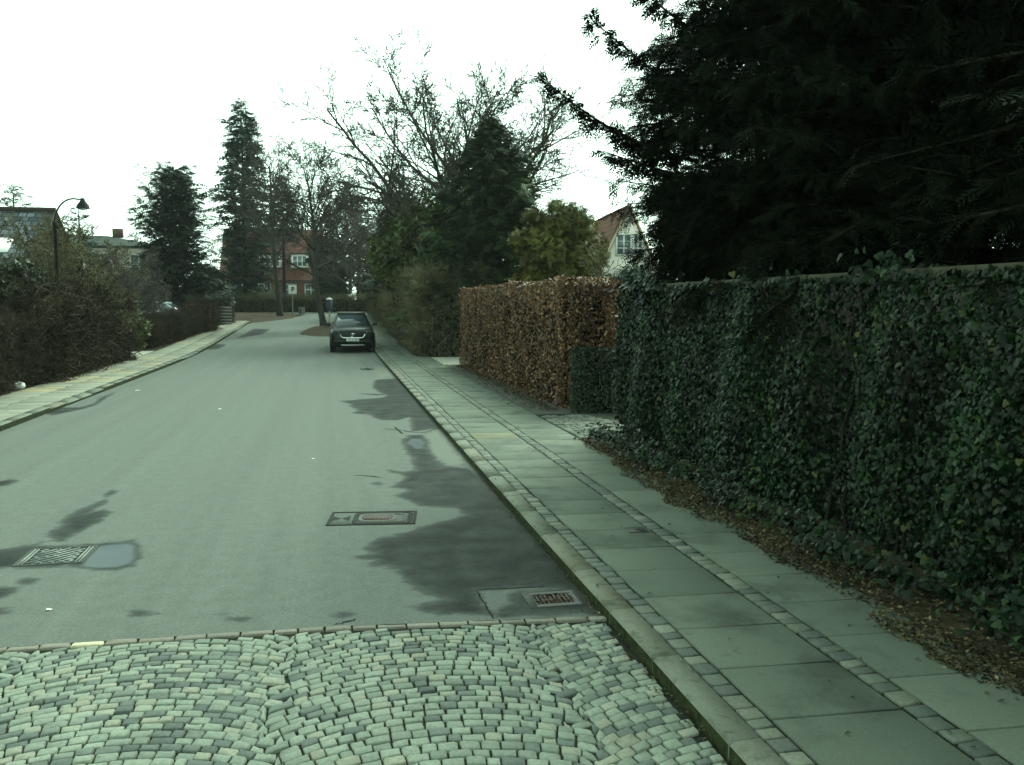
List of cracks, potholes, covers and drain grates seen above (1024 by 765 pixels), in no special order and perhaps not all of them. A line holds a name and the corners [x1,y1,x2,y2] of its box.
drain grate [520,589,585,621]
manhole cover [325,511,417,526]
